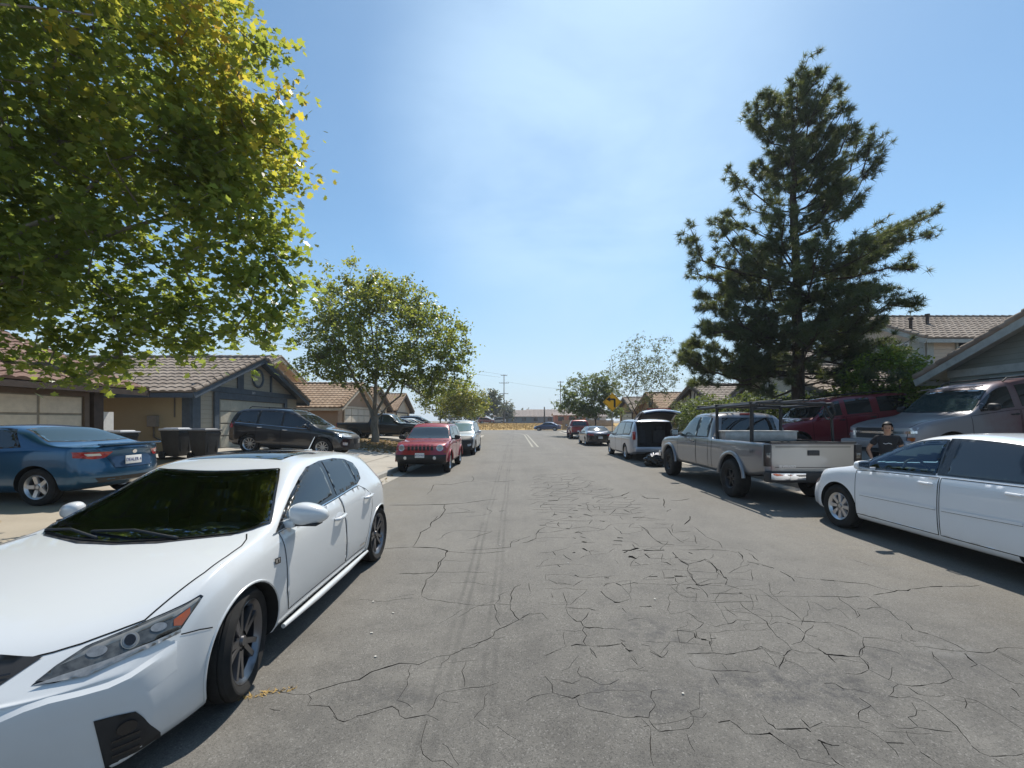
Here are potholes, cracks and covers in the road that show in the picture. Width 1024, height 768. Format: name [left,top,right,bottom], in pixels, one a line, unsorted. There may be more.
crack [360,476,514,601]
crack [259,582,544,768]
crack [512,474,1024,767]
